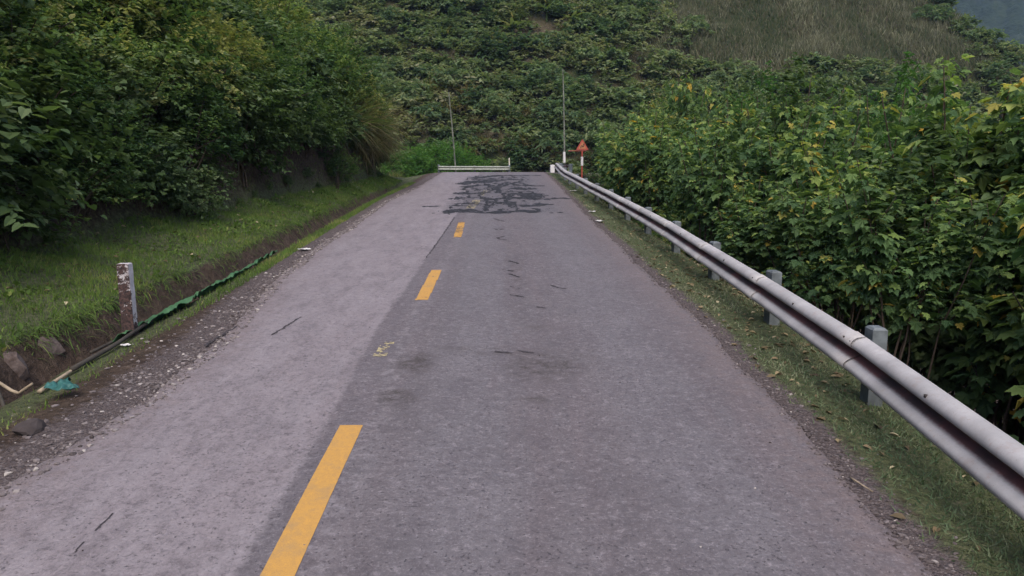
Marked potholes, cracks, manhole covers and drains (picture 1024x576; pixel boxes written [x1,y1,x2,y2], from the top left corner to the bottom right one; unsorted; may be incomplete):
crack [502,261,545,308]
